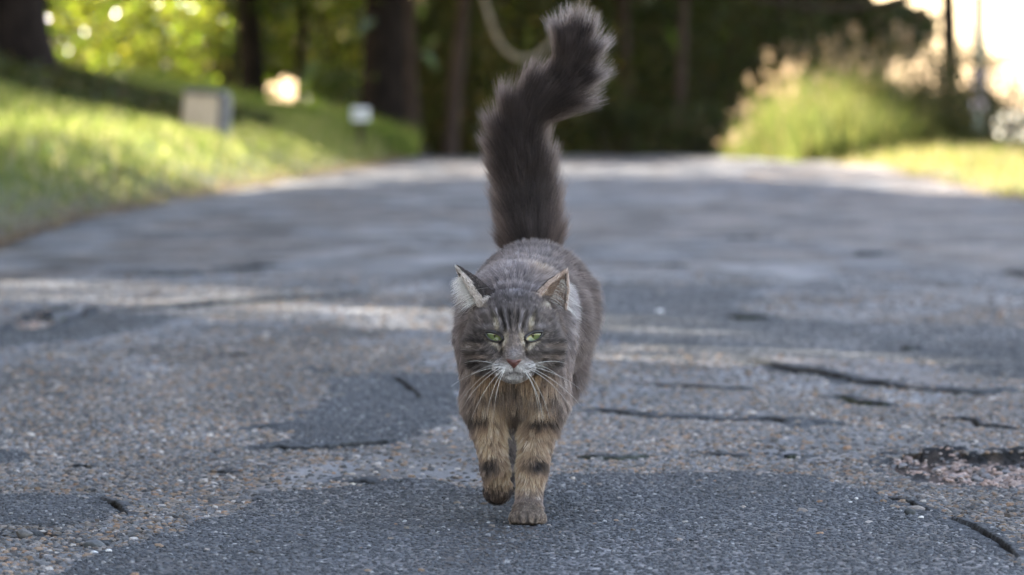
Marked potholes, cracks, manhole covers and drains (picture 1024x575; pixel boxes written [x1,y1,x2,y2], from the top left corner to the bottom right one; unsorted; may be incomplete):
crack [84,497,146,516]
pothole [867,444,1024,493]
pothole [0,304,102,333]
crack [863,494,1024,561]
crack [380,375,446,399]
crack [572,346,1024,431]
